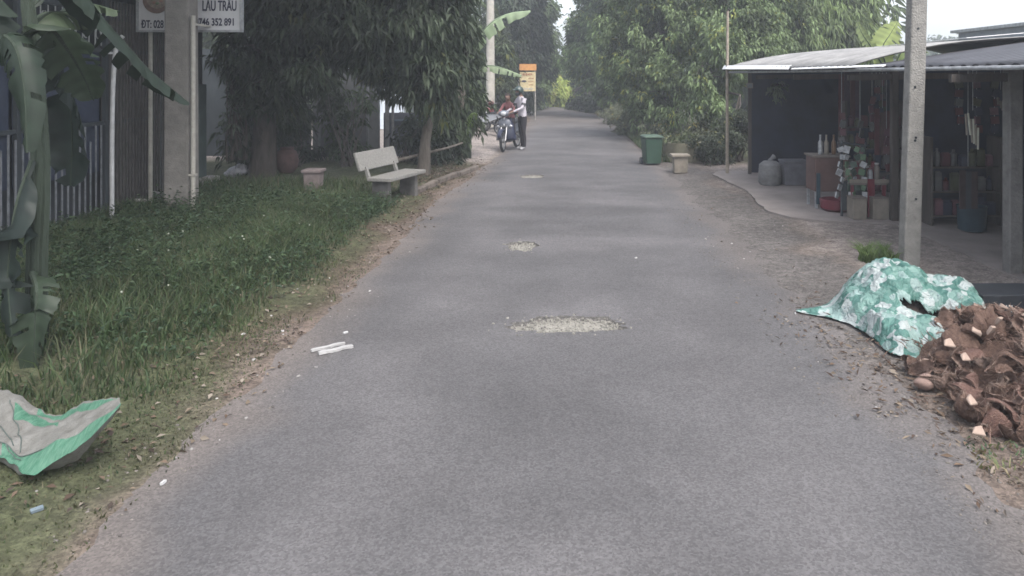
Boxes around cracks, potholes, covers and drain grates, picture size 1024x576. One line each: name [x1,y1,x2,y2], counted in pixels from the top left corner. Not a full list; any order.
pothole [503,241,540,253]
pothole [488,313,641,336]
